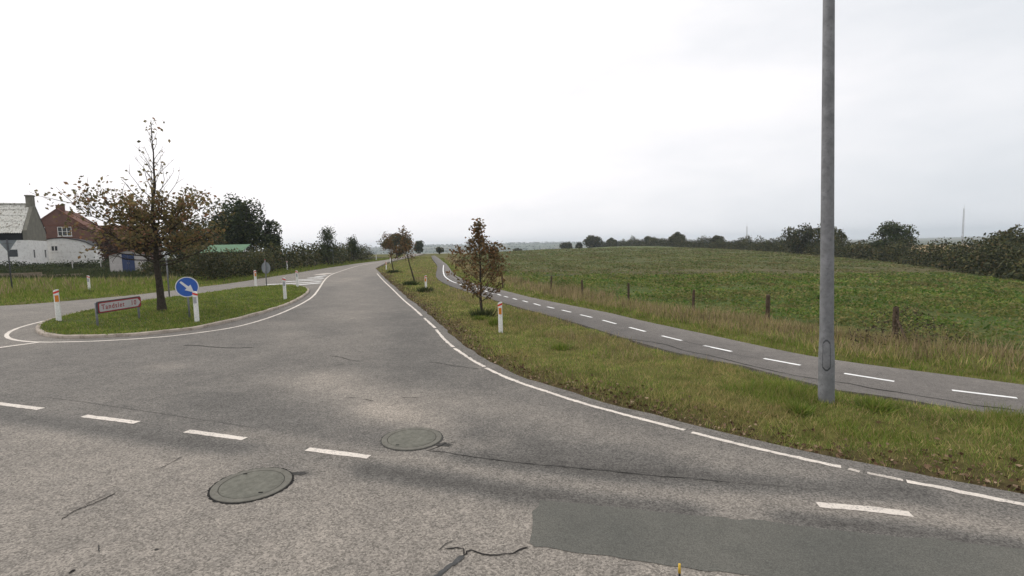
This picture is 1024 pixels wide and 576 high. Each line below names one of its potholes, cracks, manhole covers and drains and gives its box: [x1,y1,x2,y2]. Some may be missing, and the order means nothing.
manhole cover [380,427,444,451]
crack [439,540,527,556]
manhole cover [207,467,294,504]
